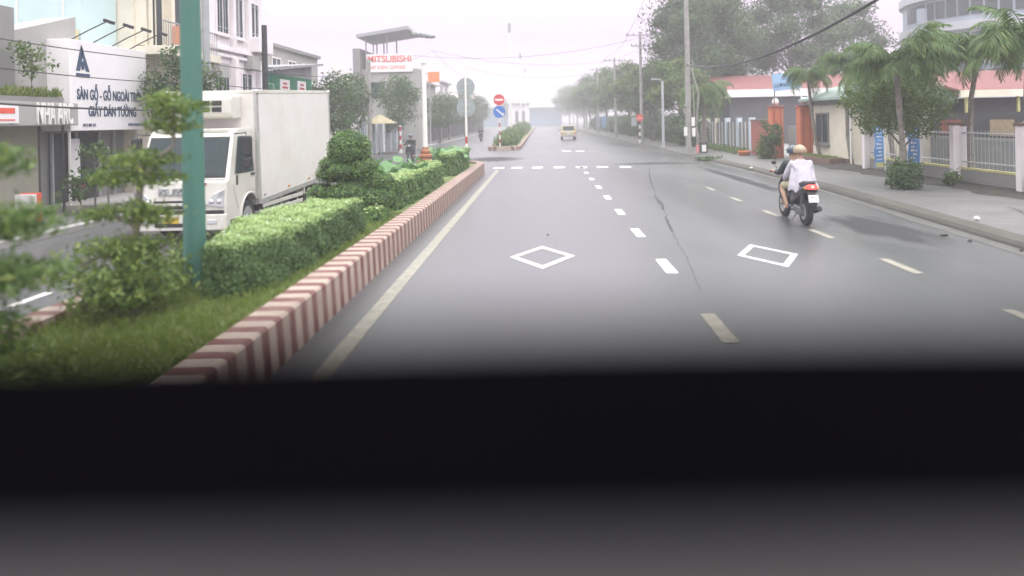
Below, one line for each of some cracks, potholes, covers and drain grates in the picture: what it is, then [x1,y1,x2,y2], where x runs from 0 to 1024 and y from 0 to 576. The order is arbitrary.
crack [641,169,700,291]
